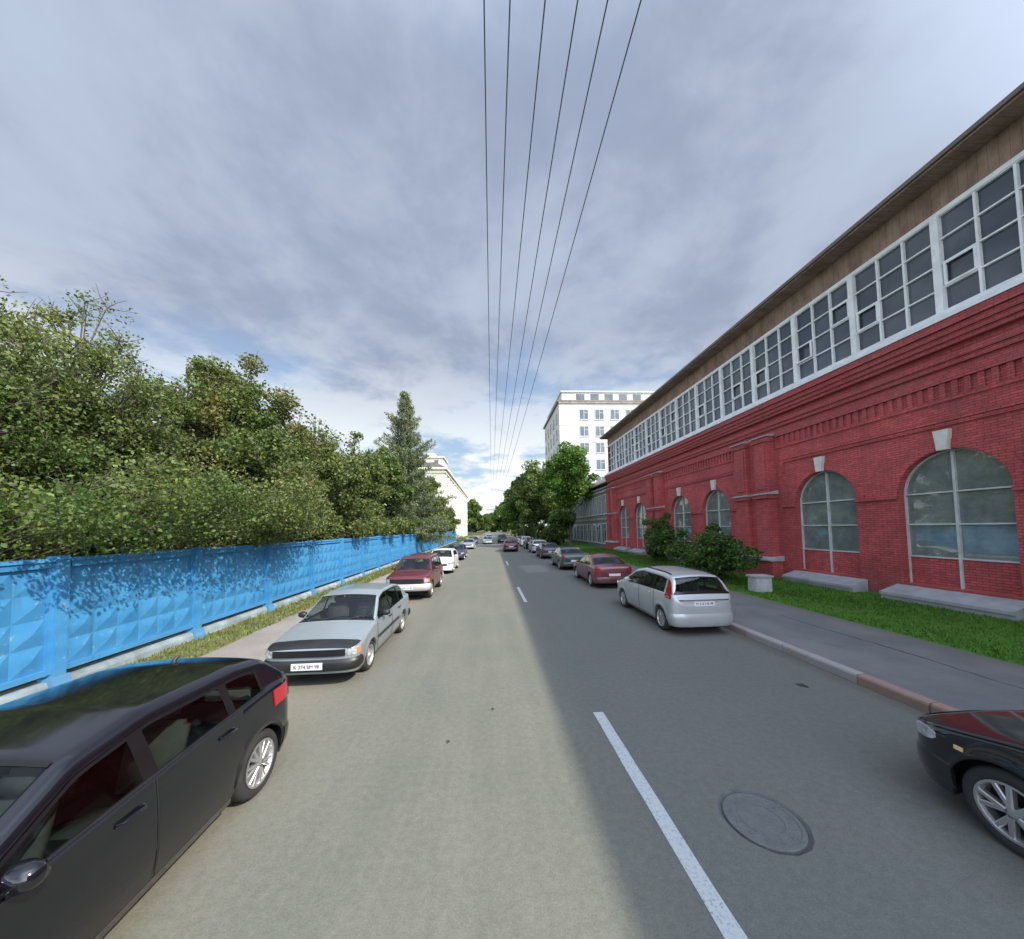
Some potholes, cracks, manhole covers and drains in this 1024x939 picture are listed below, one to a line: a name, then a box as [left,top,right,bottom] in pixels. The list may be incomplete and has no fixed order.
manhole cover [717,789,815,857]
